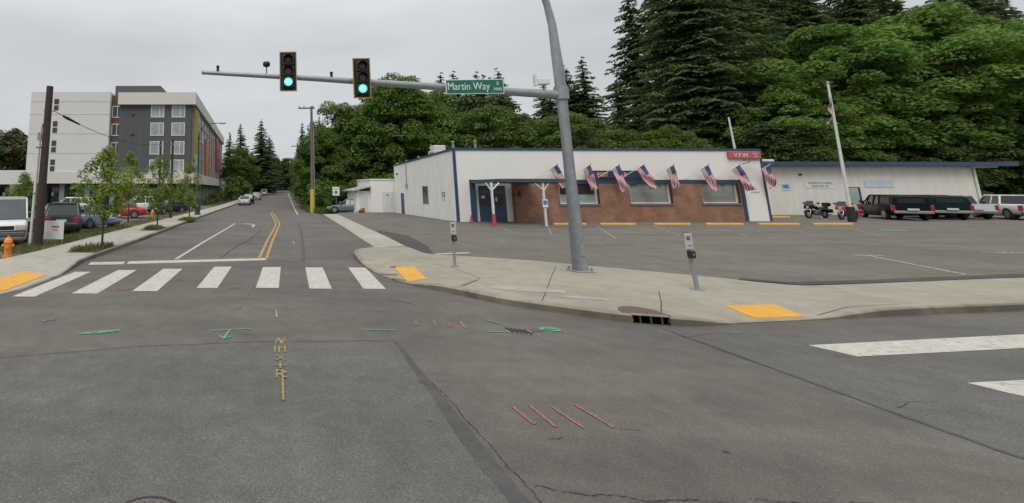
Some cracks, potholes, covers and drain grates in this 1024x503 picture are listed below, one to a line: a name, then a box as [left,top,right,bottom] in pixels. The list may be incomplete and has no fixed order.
drain grate [618,306,670,325]
drain grate [505,327,533,335]
